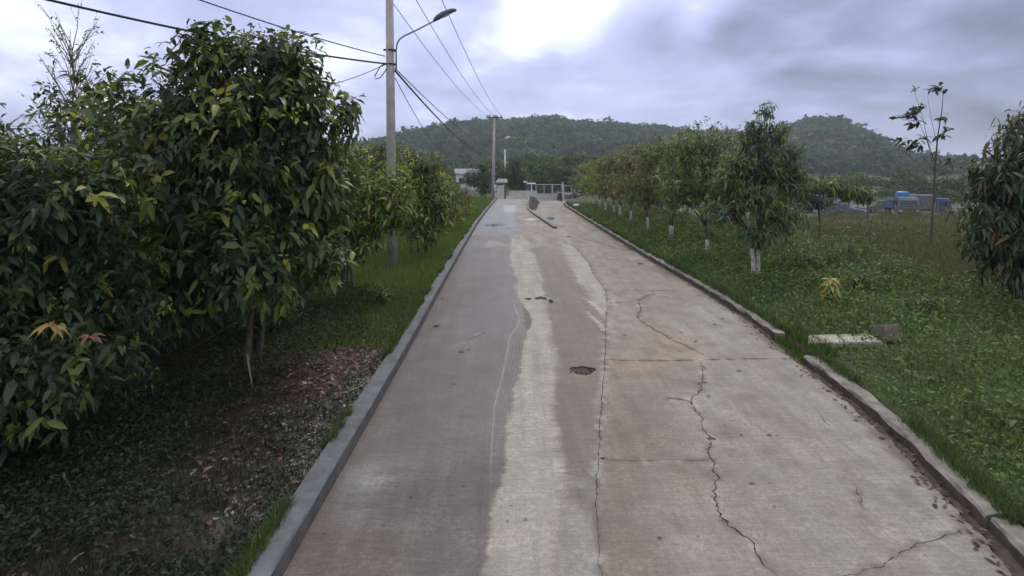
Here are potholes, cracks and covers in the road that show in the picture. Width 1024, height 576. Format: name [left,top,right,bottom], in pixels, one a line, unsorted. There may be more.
crack [567,243,784,576]
crack [844,529,962,576]
pothole [570,366,596,375]
